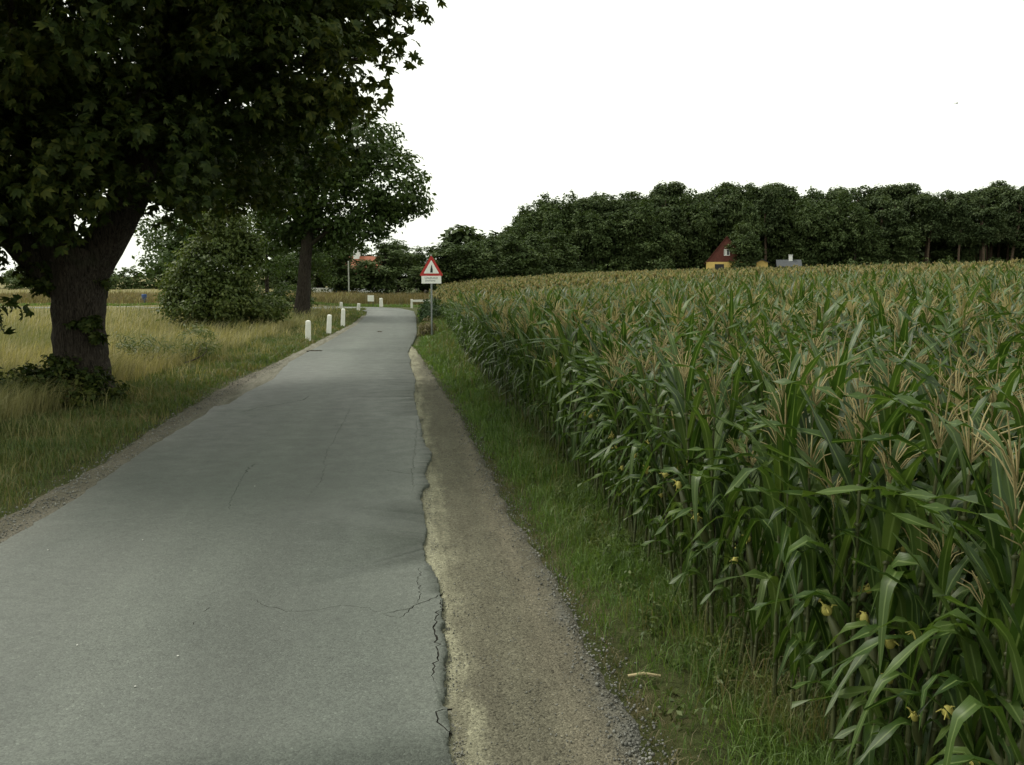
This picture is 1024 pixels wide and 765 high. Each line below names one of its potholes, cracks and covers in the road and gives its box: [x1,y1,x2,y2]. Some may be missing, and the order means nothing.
crack [435,709,452,739]
crack [257,572,444,683]
